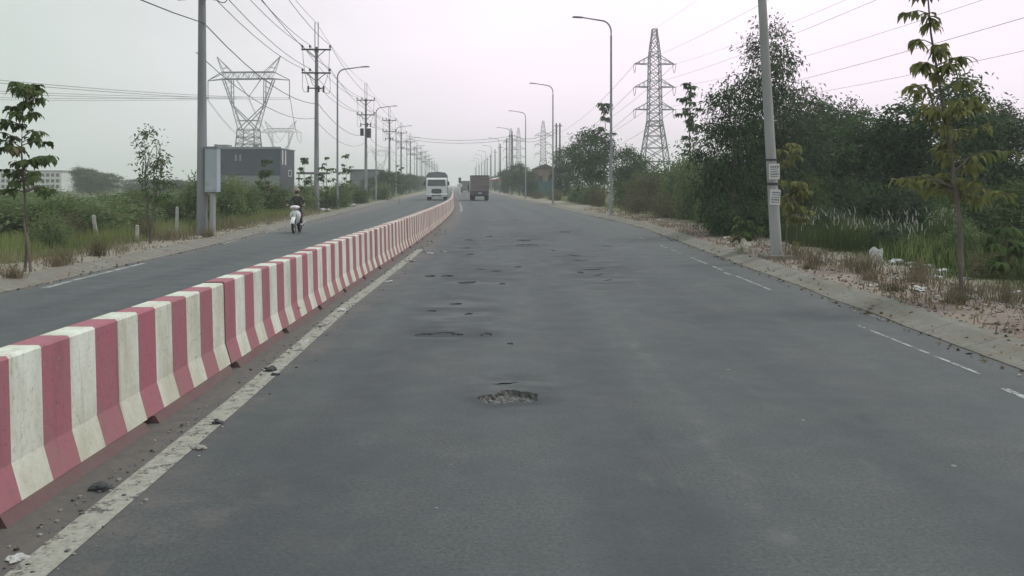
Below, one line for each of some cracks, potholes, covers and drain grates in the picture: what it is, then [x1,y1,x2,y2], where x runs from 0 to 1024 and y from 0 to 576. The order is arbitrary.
pothole [476,390,539,404]
